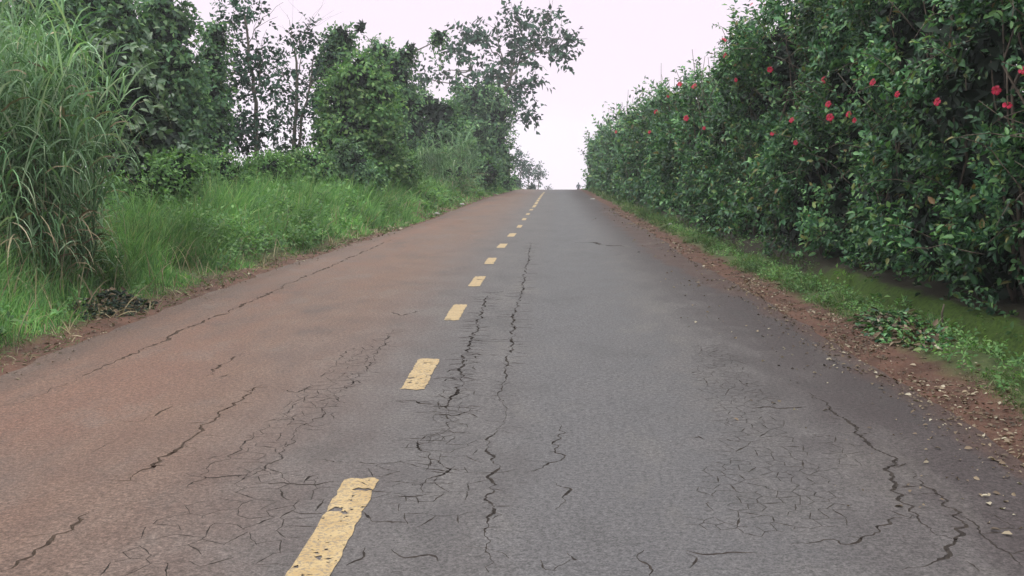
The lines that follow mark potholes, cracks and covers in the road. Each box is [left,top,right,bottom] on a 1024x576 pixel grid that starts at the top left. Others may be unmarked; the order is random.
crack [680,344,1024,571]
crack [1,512,90,572]
crack [9,239,391,405]
crack [519,425,573,509]
crack [100,246,538,576]
